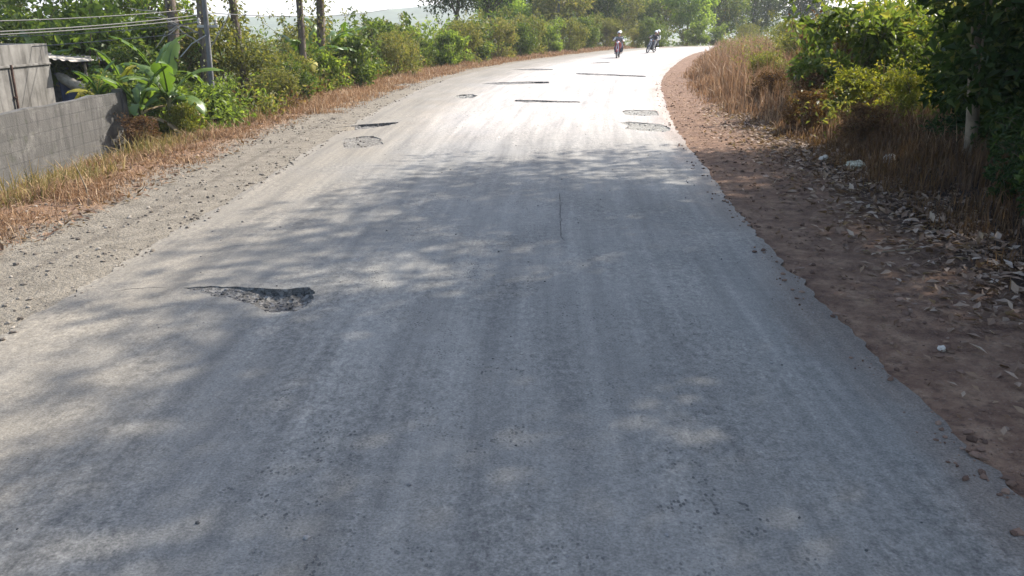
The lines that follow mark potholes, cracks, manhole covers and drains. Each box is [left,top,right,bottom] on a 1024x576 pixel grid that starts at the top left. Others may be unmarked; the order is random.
pothole [328,122,398,132]
pothole [342,136,383,149]
pothole [187,286,315,313]
pothole [619,122,670,132]
